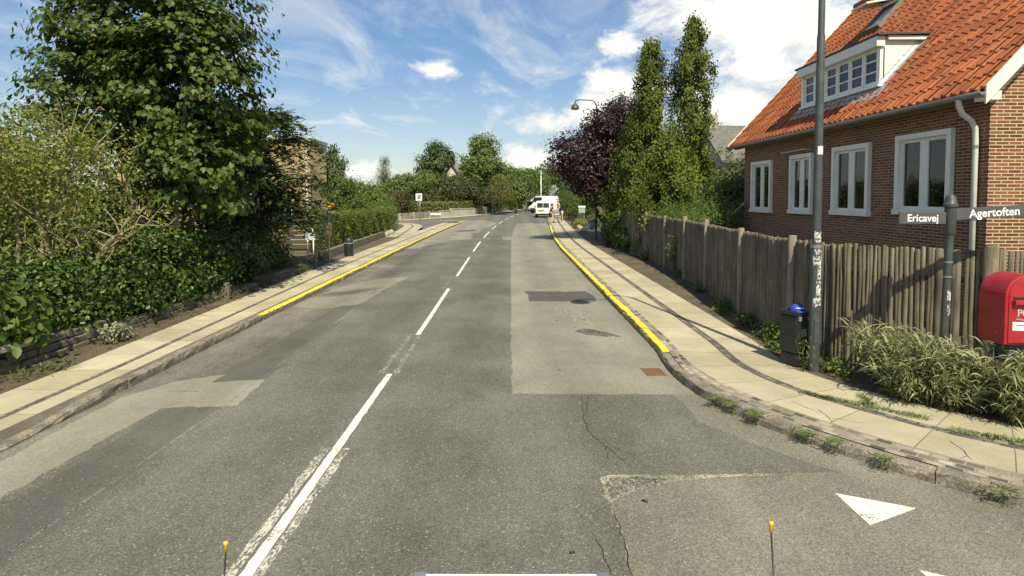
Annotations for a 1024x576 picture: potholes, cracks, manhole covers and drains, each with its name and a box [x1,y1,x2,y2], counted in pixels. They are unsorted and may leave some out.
crack [581,395,643,473]
